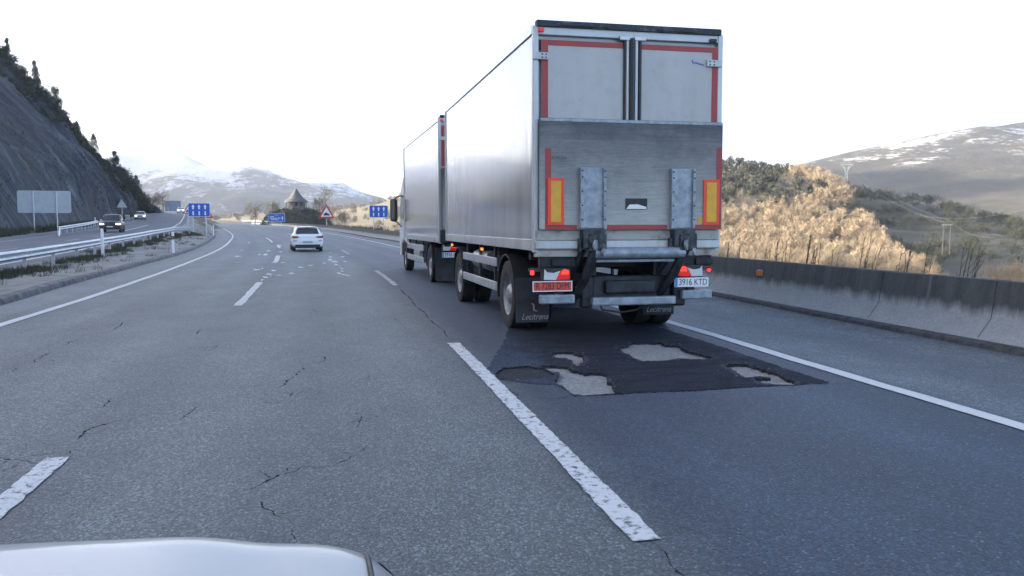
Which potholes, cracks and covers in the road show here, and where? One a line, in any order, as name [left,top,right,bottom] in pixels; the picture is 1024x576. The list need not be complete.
pothole [549,351,590,367]
pothole [612,341,719,362]
pothole [719,363,801,386]
crack [0,398,114,472]
pothole [538,365,624,396]
pothole [493,365,560,380]
crack [265,357,341,404]
crack [226,446,367,539]
